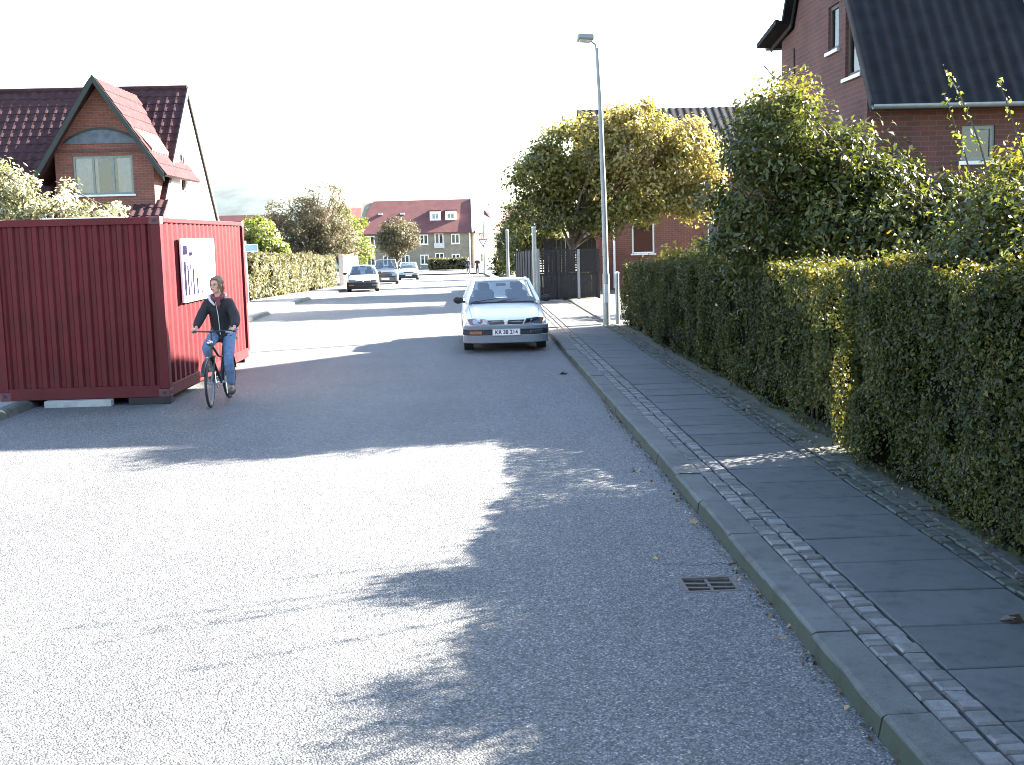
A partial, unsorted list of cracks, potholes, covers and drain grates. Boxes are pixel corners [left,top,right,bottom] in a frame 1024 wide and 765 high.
drain grate [677,575,742,593]
